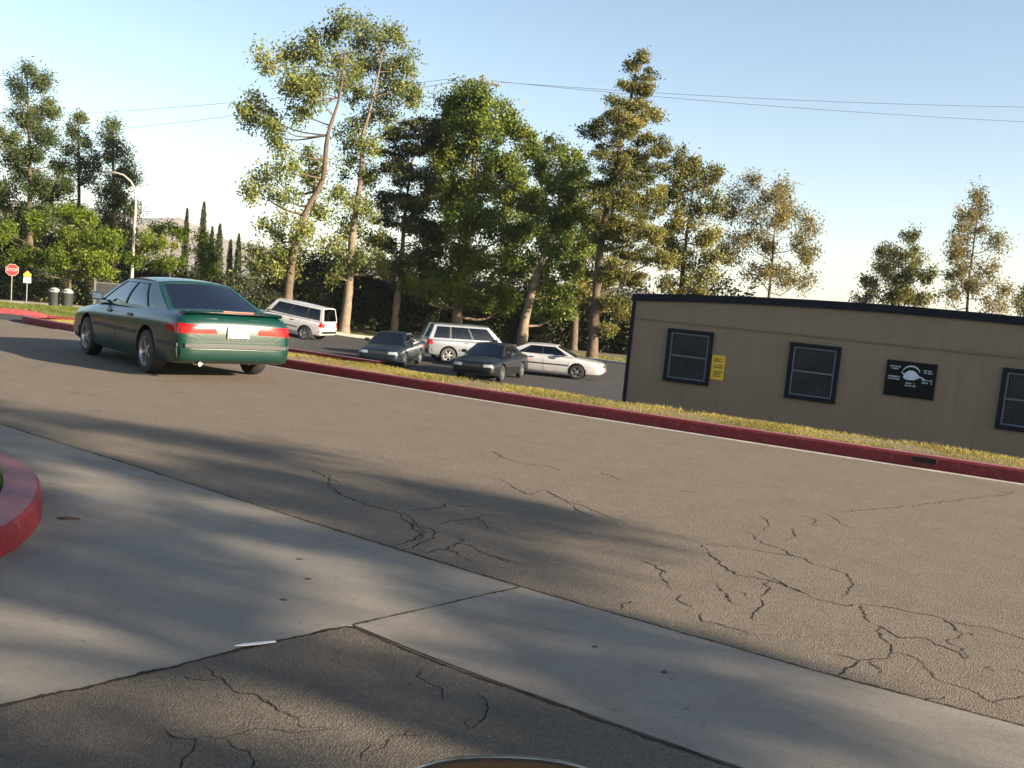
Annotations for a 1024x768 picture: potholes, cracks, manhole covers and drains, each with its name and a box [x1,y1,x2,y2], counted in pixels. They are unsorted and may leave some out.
crack [646,516,1023,704]
crack [503,480,622,521]
crack [313,470,516,563]
crack [829,494,1008,525]
crack [361,730,425,758]
crack [464,693,489,730]
crack [165,666,345,768]
